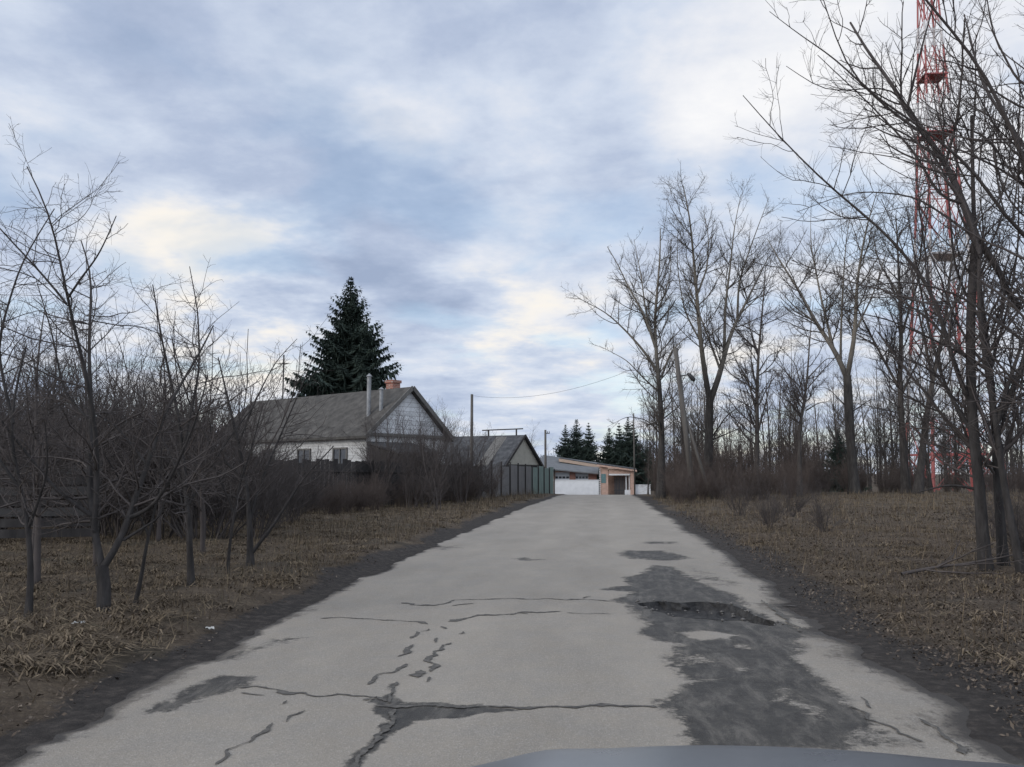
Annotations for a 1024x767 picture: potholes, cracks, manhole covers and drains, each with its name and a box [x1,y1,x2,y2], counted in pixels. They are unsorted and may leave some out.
pothole [635,599,785,626]
crack [215,596,657,767]
